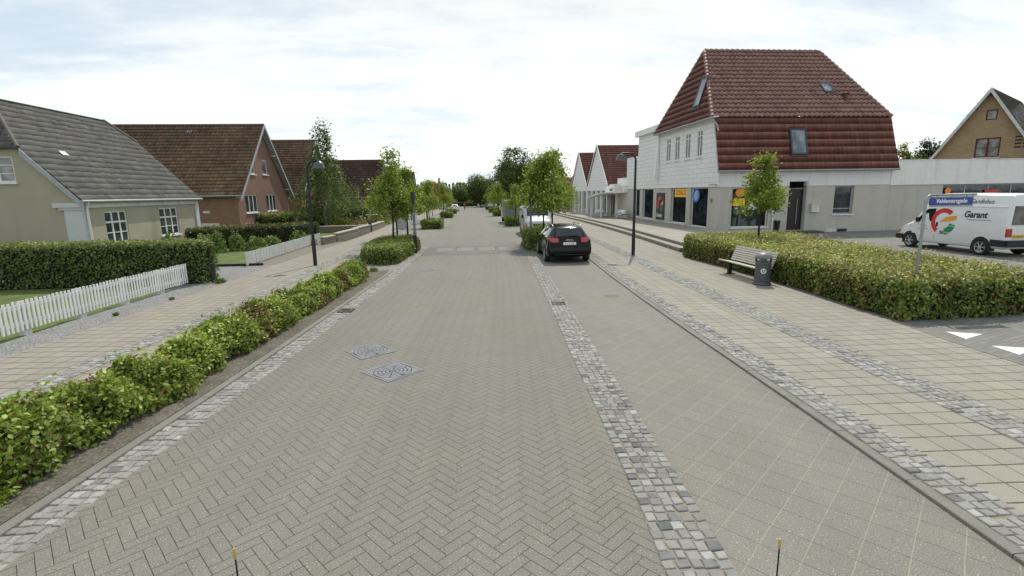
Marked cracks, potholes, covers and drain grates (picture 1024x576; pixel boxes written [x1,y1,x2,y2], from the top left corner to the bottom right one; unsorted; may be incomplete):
manhole cover [361,361,423,383]
manhole cover [345,343,397,360]
